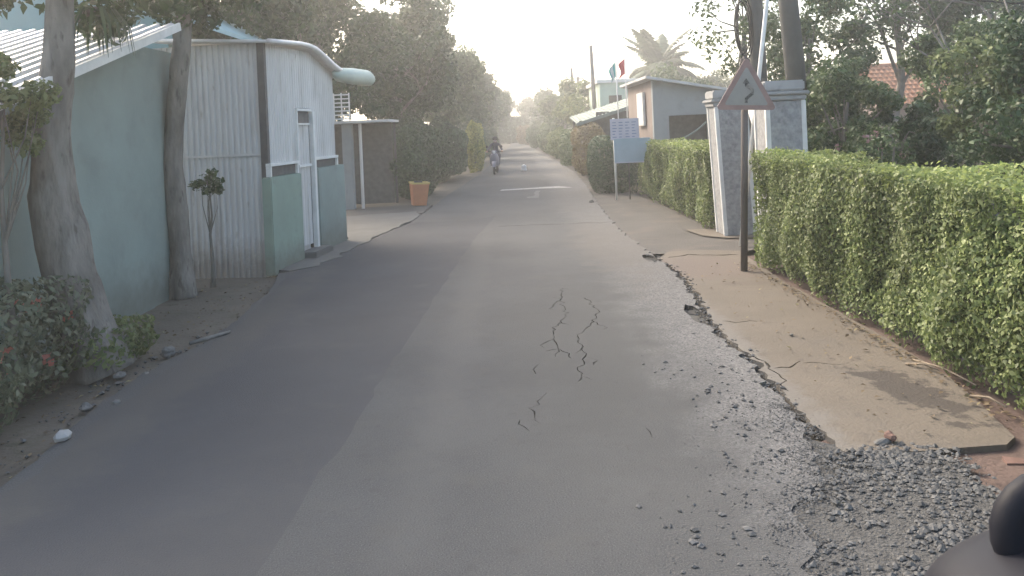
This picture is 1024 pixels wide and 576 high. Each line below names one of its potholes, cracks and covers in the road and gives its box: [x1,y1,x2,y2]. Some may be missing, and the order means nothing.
crack [545,293,605,382]
